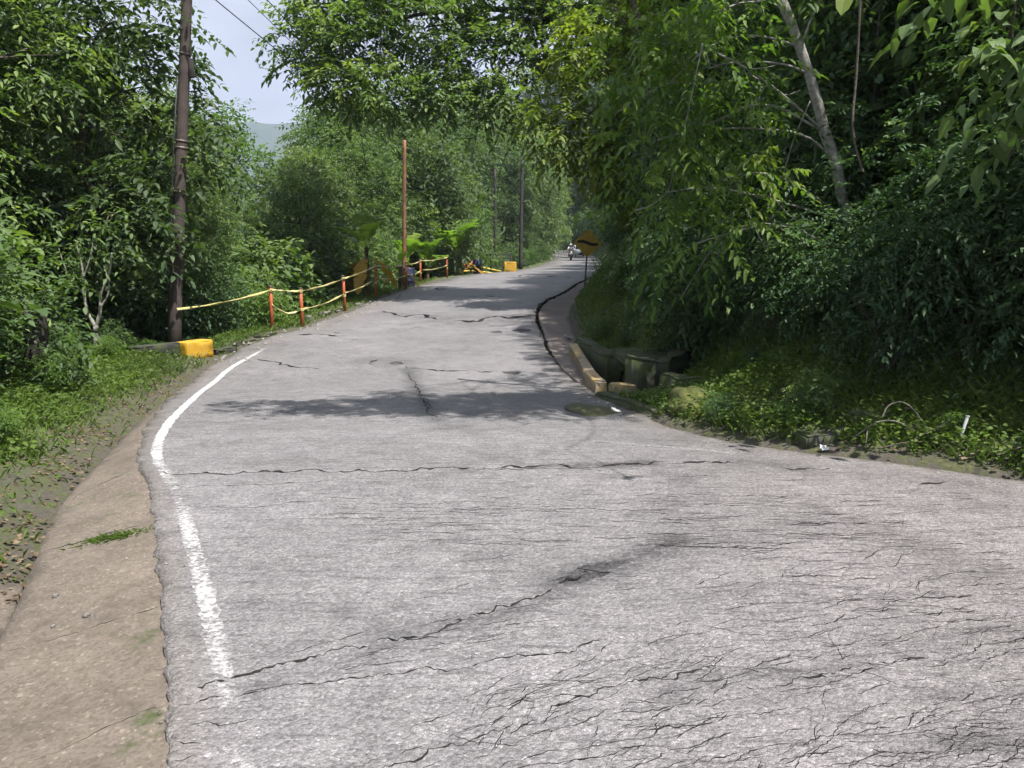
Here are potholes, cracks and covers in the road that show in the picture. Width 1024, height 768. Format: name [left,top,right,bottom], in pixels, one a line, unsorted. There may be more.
crack [383,278,588,357]
crack [258,359,319,369]
crack [163,461,732,487]
crack [157,466,1024,768]
crack [406,367,489,418]
